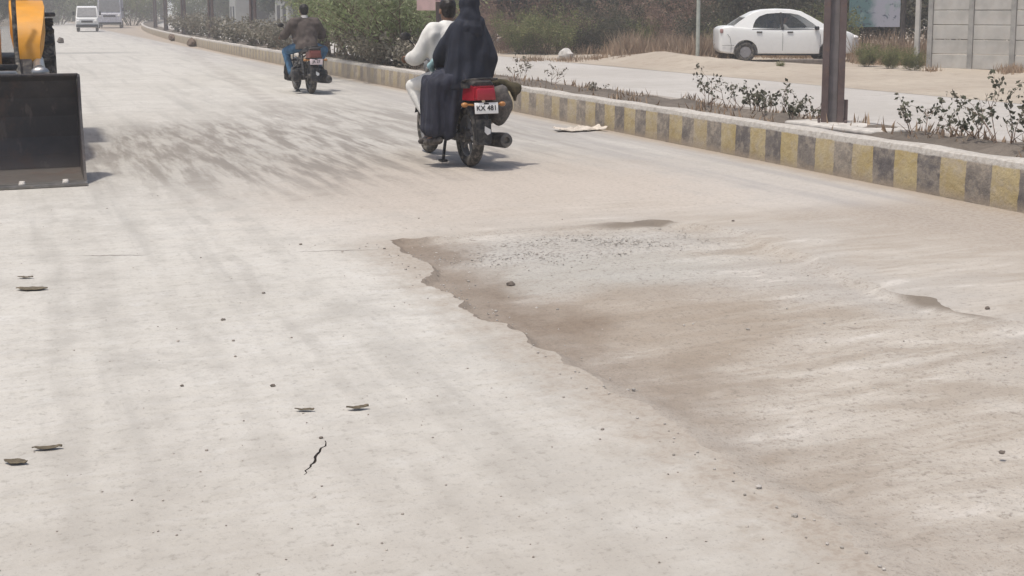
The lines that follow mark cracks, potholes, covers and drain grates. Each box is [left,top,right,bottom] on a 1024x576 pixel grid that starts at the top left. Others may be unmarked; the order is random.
crack [304,441,327,475]
